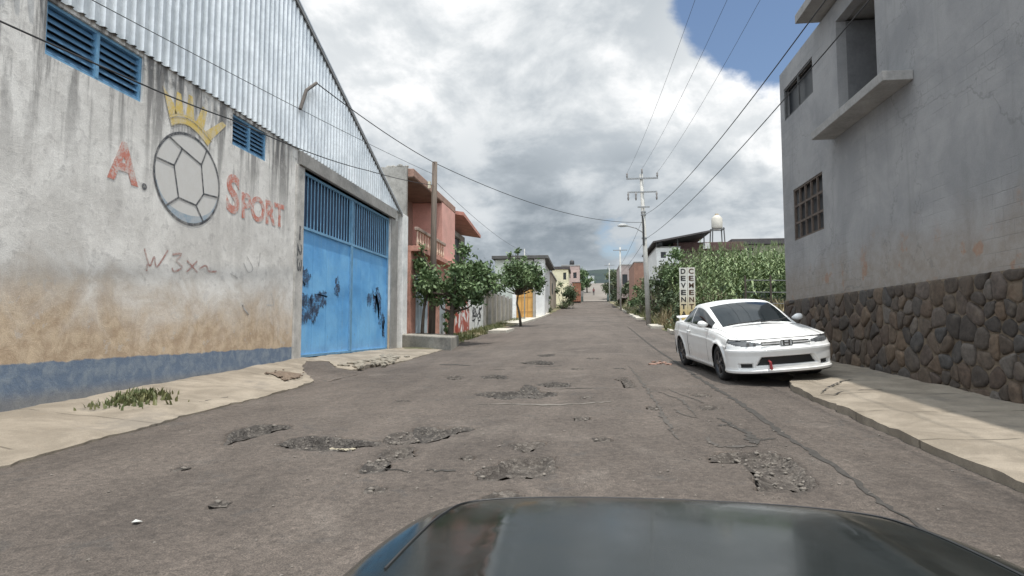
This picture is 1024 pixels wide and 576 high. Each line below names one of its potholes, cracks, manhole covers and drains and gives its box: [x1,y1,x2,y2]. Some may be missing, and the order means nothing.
pothole [474,457,557,481]
pothole [358,459,392,474]
crack [614,322,927,530]
pothole [710,451,818,492]
pothole [412,427,474,444]
pothole [617,377,635,388]
pothole [383,431,417,445]
pothole [278,436,382,452]
pothole [224,424,291,445]
pothole [474,385,557,400]
